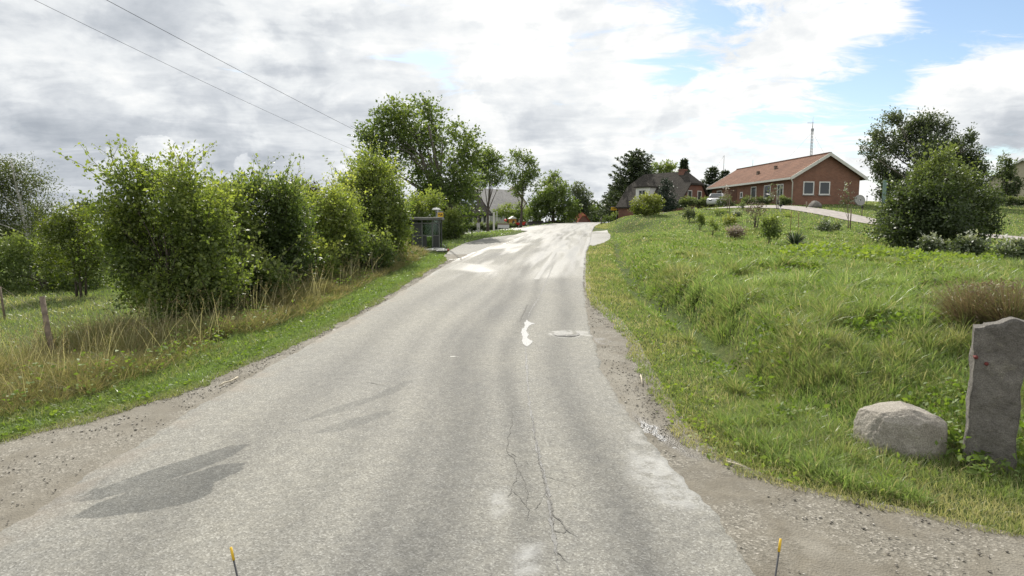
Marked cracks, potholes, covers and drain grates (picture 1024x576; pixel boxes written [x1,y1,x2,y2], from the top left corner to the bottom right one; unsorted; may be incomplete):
crack [506,347,575,571]
crack [519,269,552,322]
